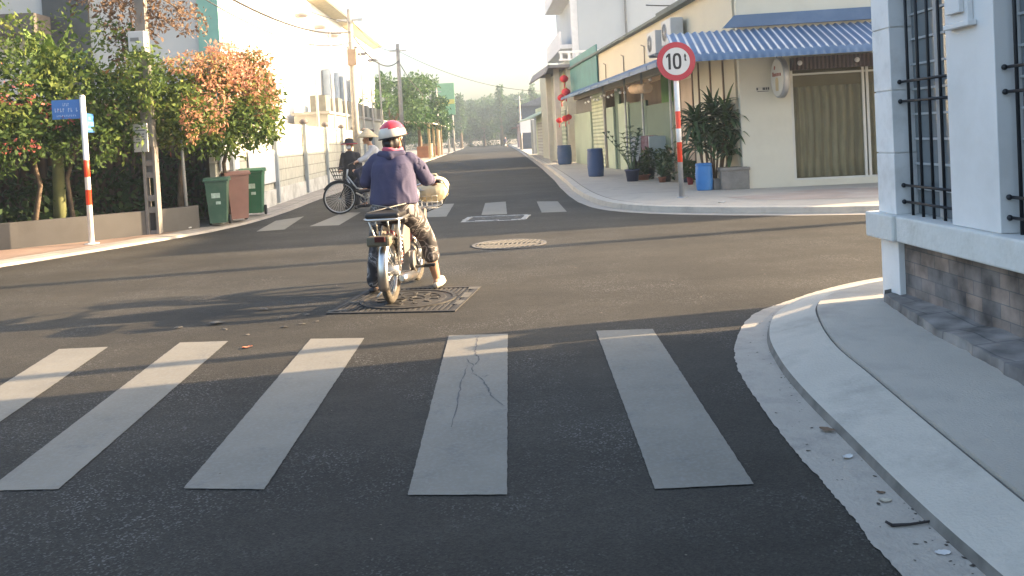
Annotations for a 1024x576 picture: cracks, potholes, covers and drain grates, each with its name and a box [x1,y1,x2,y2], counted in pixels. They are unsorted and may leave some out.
manhole cover [326,286,481,314]
crack [451,336,503,427]
manhole cover [472,239,547,249]
